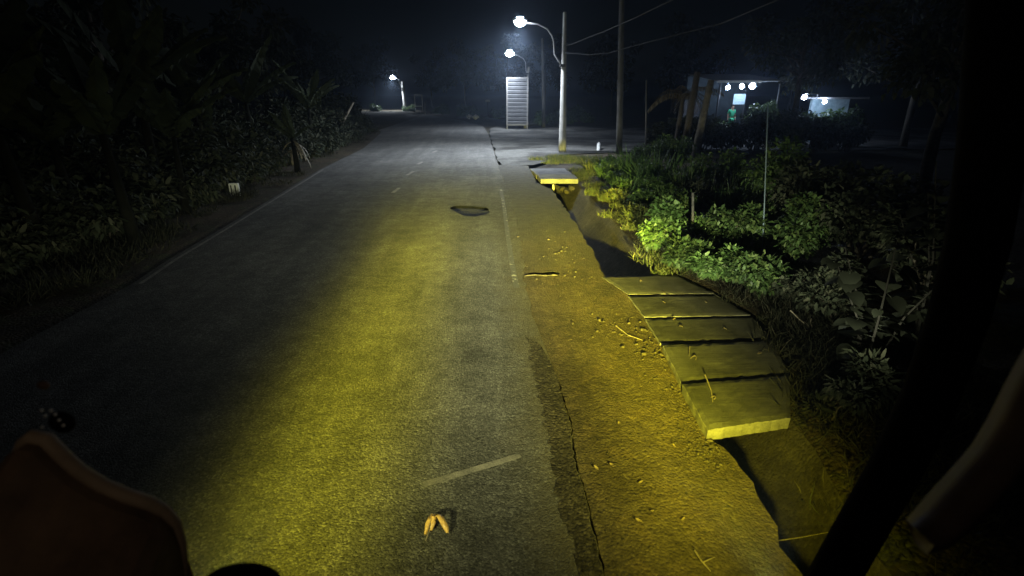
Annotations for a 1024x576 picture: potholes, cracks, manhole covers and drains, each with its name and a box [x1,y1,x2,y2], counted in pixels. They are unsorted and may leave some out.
pothole [450,205,490,217]
crack [560,386,653,570]
